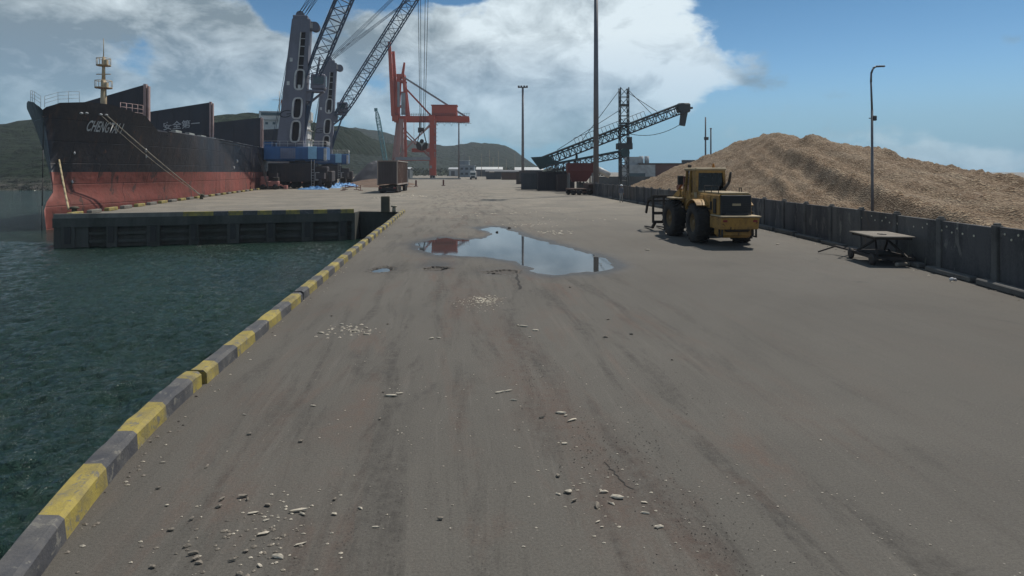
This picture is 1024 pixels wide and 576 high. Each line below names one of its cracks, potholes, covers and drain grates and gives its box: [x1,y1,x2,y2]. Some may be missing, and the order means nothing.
pothole [479,268,522,276]
pothole [365,265,394,273]
